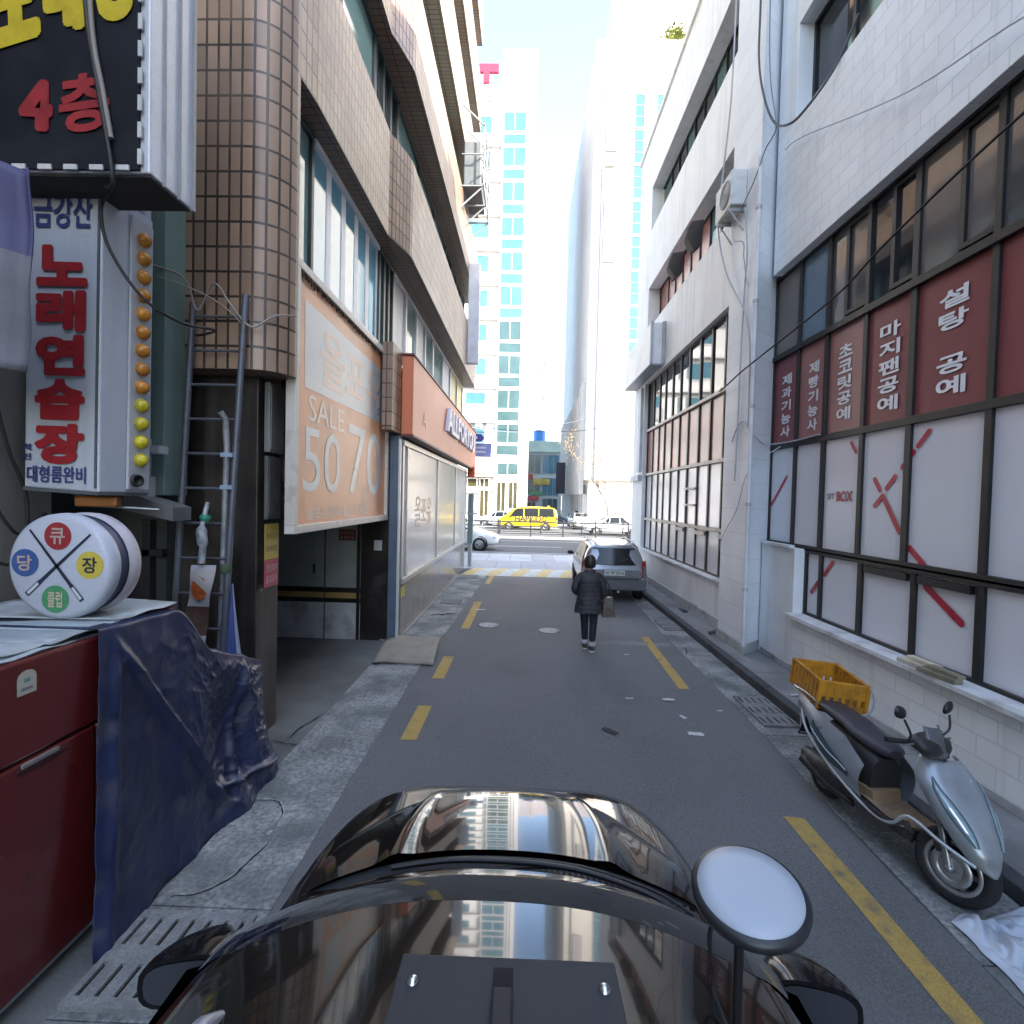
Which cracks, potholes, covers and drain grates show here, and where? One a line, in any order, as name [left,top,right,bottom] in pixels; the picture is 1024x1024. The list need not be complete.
drain grate [57,909,257,1015]
drain grate [654,619,684,631]
crack [170,798,286,897]
drain grate [733,695,800,729]
